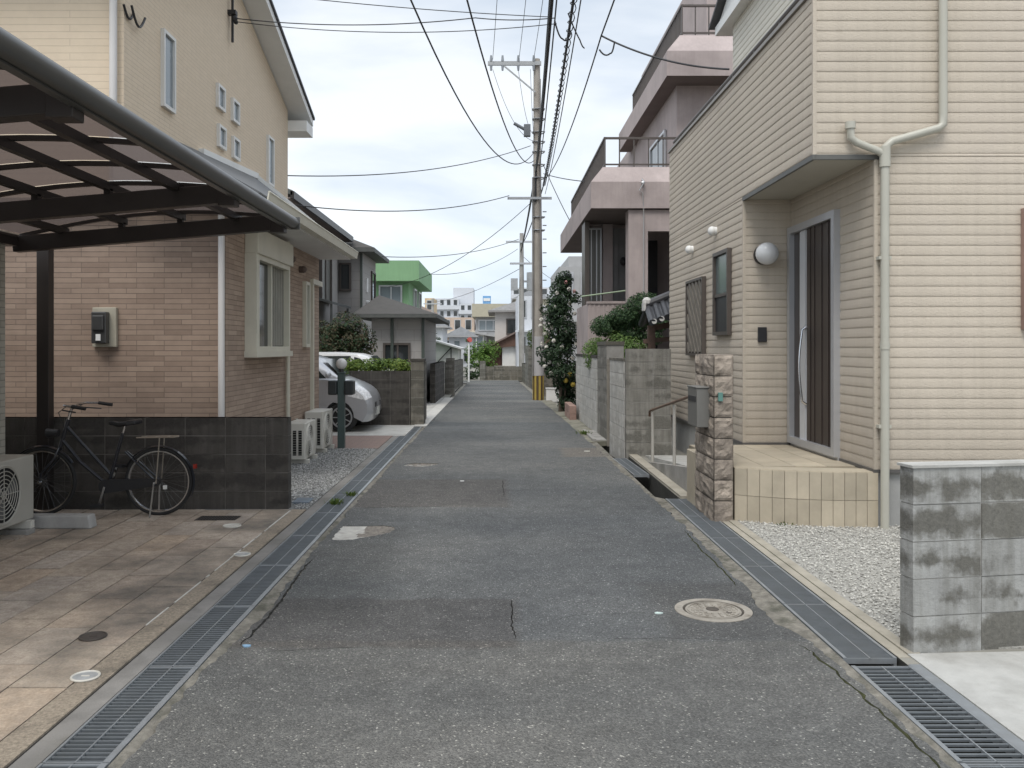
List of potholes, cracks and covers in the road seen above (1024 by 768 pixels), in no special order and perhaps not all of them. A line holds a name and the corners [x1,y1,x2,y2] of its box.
drain grate [42,666,199,766]
drain grate [316,495,359,513]
drain grate [364,459,392,469]
crack [241,560,356,651]
drain grate [148,606,255,667]
drain grate [374,450,400,459]
drain grate [258,535,321,566]
crack [802,646,941,768]
drain grate [351,468,383,481]
crack [687,533,735,584]
drain grate [851,665,1024,764]
manhole cover [674,598,753,623]
